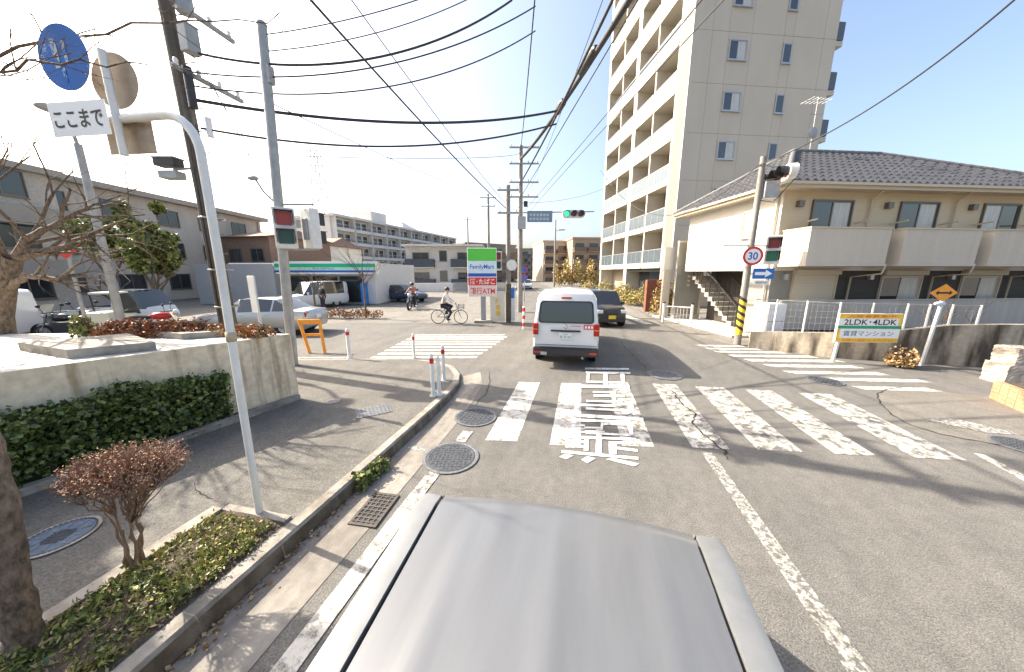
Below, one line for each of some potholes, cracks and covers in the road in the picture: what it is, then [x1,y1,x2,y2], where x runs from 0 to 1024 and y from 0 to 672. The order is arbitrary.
manhole cover [422,442,479,474]
drain grate [347,492,400,528]
manhole cover [647,370,683,380]
manhole cover [454,408,497,427]
manhole cover [28,516,103,559]
manhole cover [806,376,846,386]
manhole cover [987,435,1024,452]
crack [672,391,734,458]
